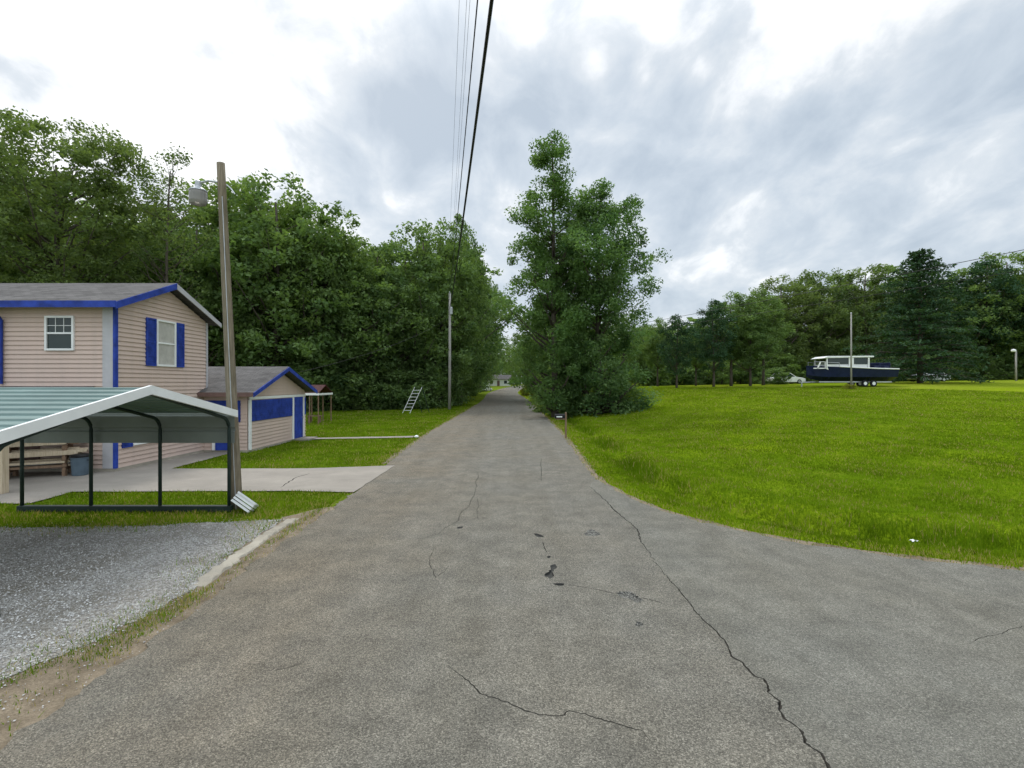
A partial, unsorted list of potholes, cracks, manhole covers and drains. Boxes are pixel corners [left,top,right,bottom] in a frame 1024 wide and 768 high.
pothole [616,591,644,603]
crack [447,665,660,744]
crack [589,486,831,768]
crack [429,476,479,577]
